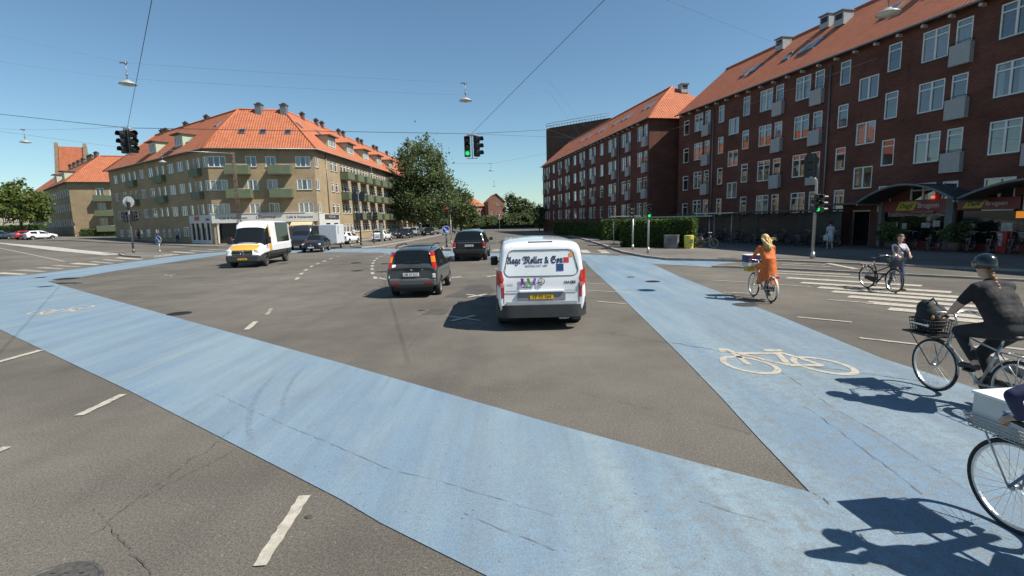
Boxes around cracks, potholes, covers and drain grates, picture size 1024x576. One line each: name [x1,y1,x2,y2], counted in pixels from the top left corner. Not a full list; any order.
crack [78,428,235,574]
manhole cover [28,561,104,576]
